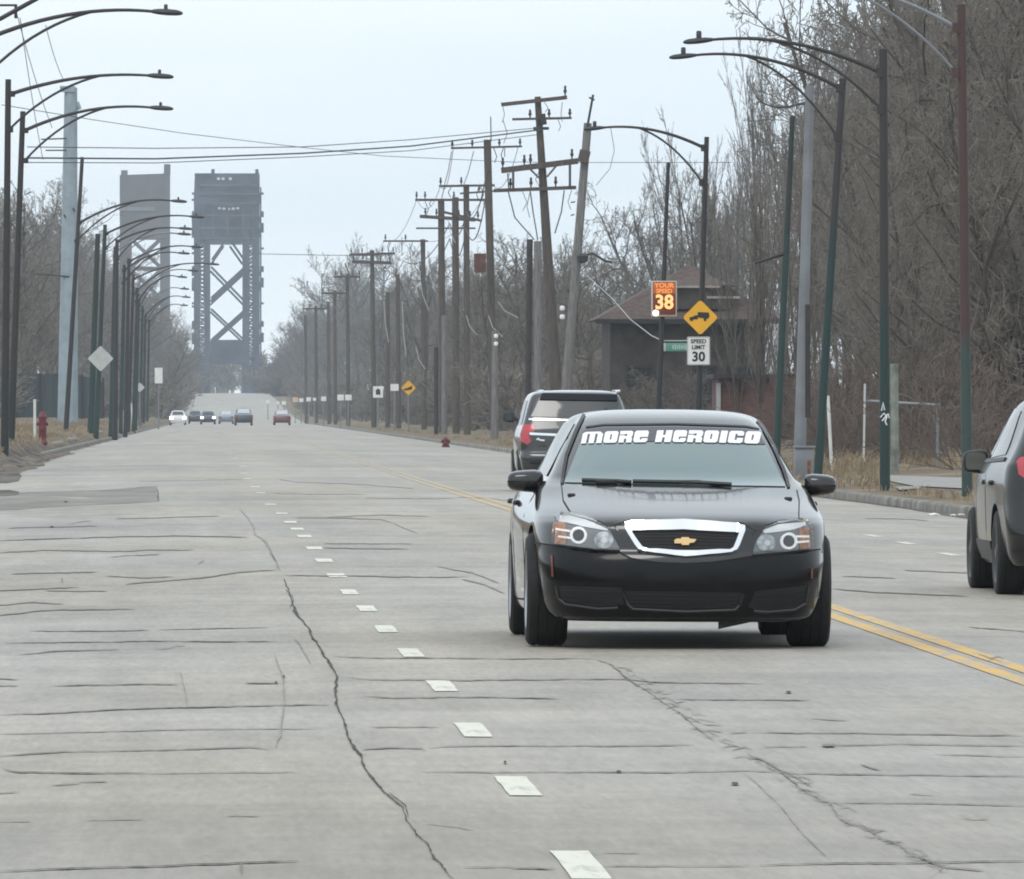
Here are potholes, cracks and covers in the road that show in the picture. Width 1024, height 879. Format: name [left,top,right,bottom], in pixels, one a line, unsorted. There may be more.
crack [280,479,437,549]
crack [0,510,1024,878]
